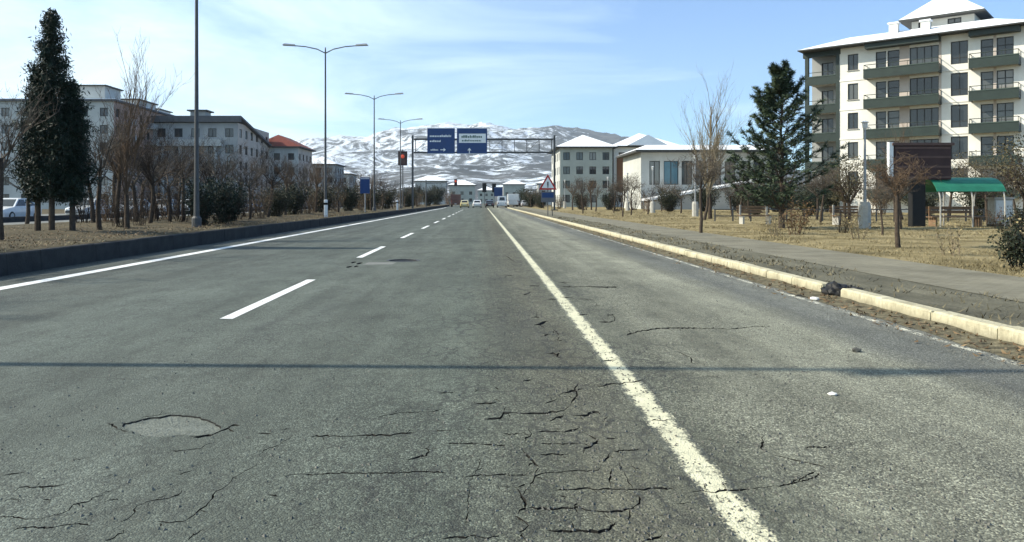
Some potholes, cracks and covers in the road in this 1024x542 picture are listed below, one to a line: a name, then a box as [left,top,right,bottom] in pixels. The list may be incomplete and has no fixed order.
pothole [122,415,221,437]
crack [2,428,288,542]
crack [285,384,830,542]
crack [524,282,769,358]
